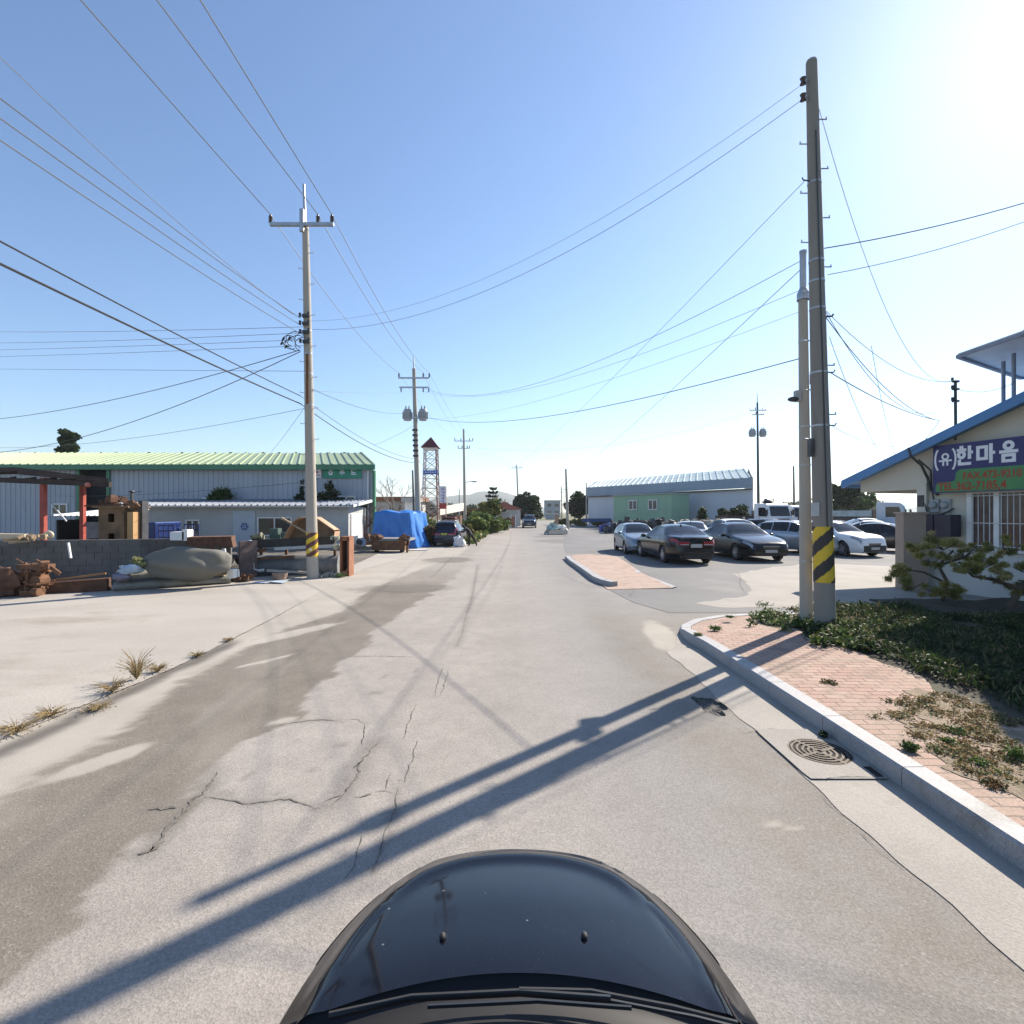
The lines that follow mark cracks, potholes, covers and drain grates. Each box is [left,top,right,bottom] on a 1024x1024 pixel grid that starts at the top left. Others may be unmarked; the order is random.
crack [138,566,478,877]
pothole [691,697,728,716]
